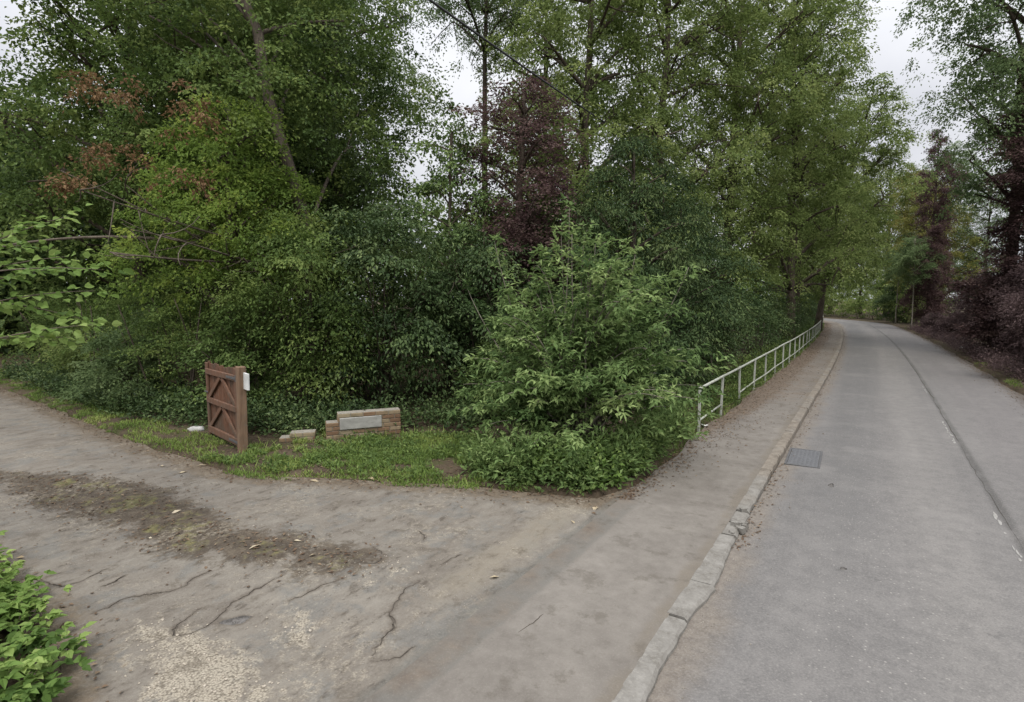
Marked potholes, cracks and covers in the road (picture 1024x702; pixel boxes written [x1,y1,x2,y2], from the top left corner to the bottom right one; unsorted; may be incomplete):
manhole cover [784,447,823,469]
crack [37,571,279,636]
crack [371,580,420,662]
